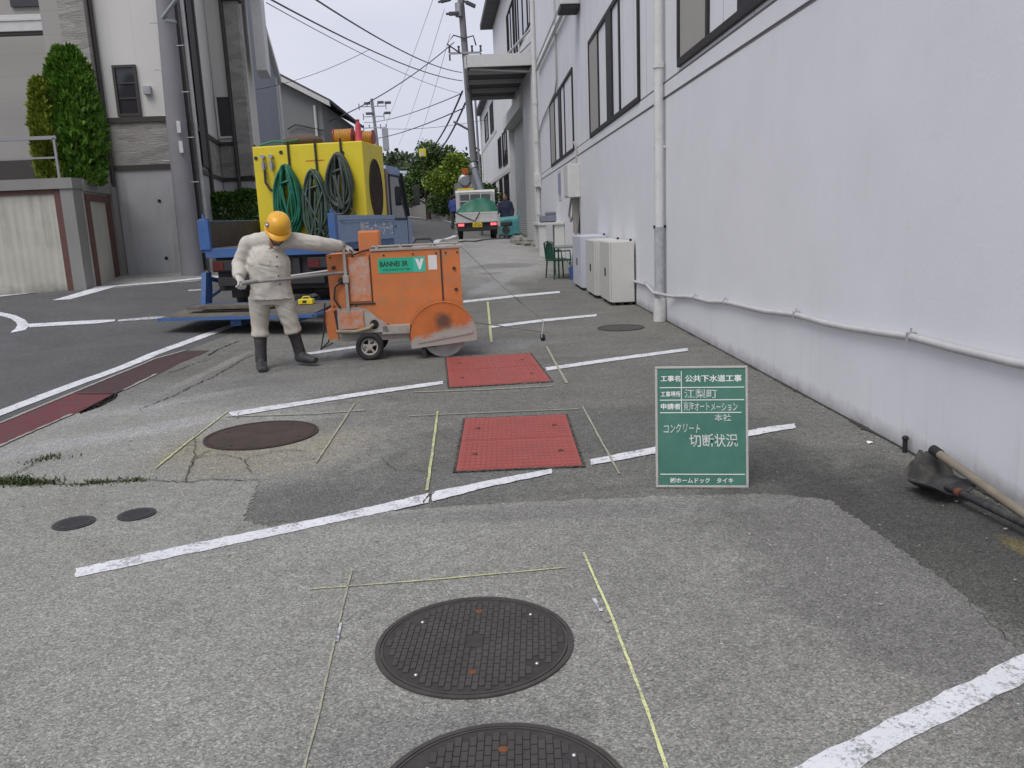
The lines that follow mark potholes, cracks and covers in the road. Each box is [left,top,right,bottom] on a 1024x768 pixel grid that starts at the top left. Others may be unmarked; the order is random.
crack [177,430,305,482]
utility cover [117,507,156,521]
manhole cover [203,420,318,451]
utility cover [52,515,96,531]
manhole cover [375,596,574,700]
crack [144,341,255,407]
manhole cover [390,722,623,768]
